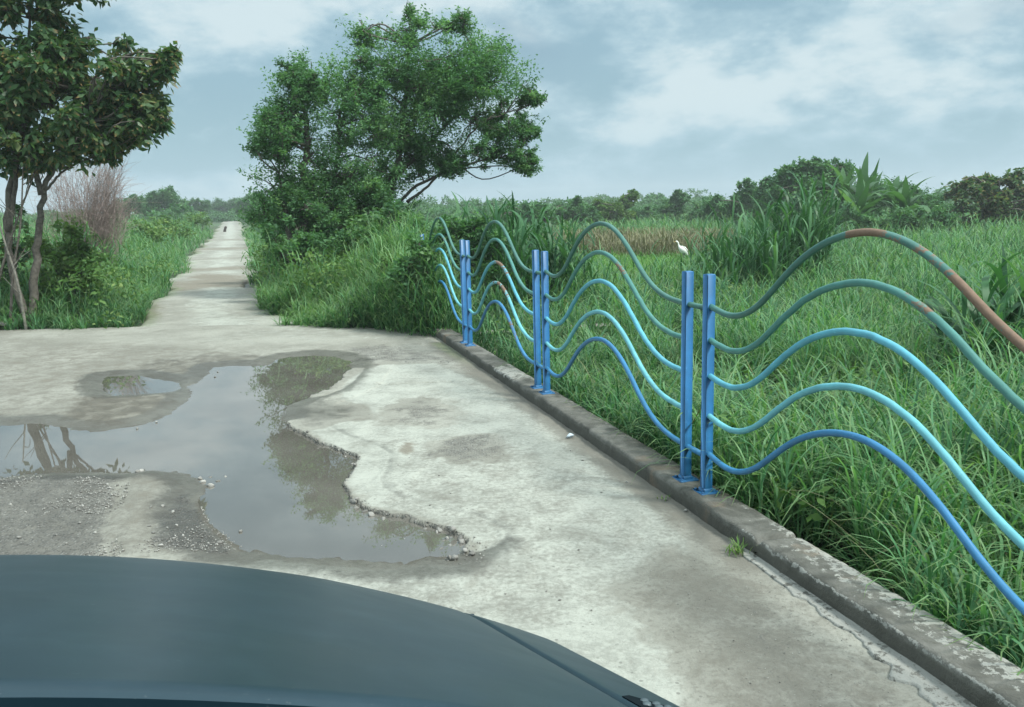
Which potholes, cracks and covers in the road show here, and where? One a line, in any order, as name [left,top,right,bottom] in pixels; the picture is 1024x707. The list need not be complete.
pothole [0,350,516,583]
